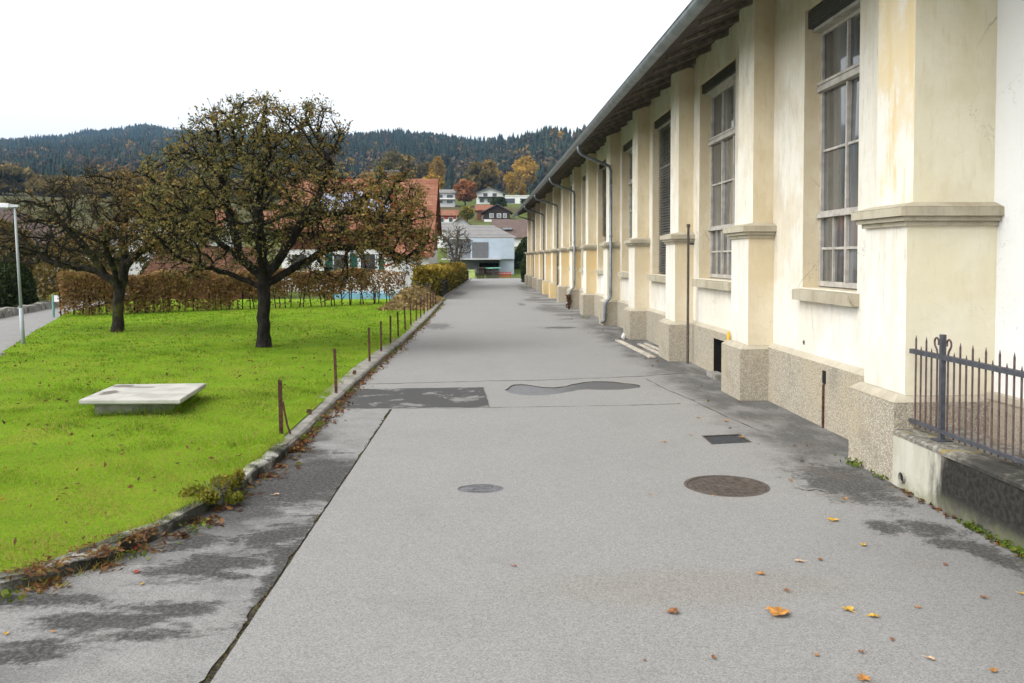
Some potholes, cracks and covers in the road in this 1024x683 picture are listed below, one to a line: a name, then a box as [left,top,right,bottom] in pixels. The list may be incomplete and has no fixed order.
manhole cover [457,484,504,493]
manhole cover [684,475,770,497]
drain grate [702,434,751,444]
